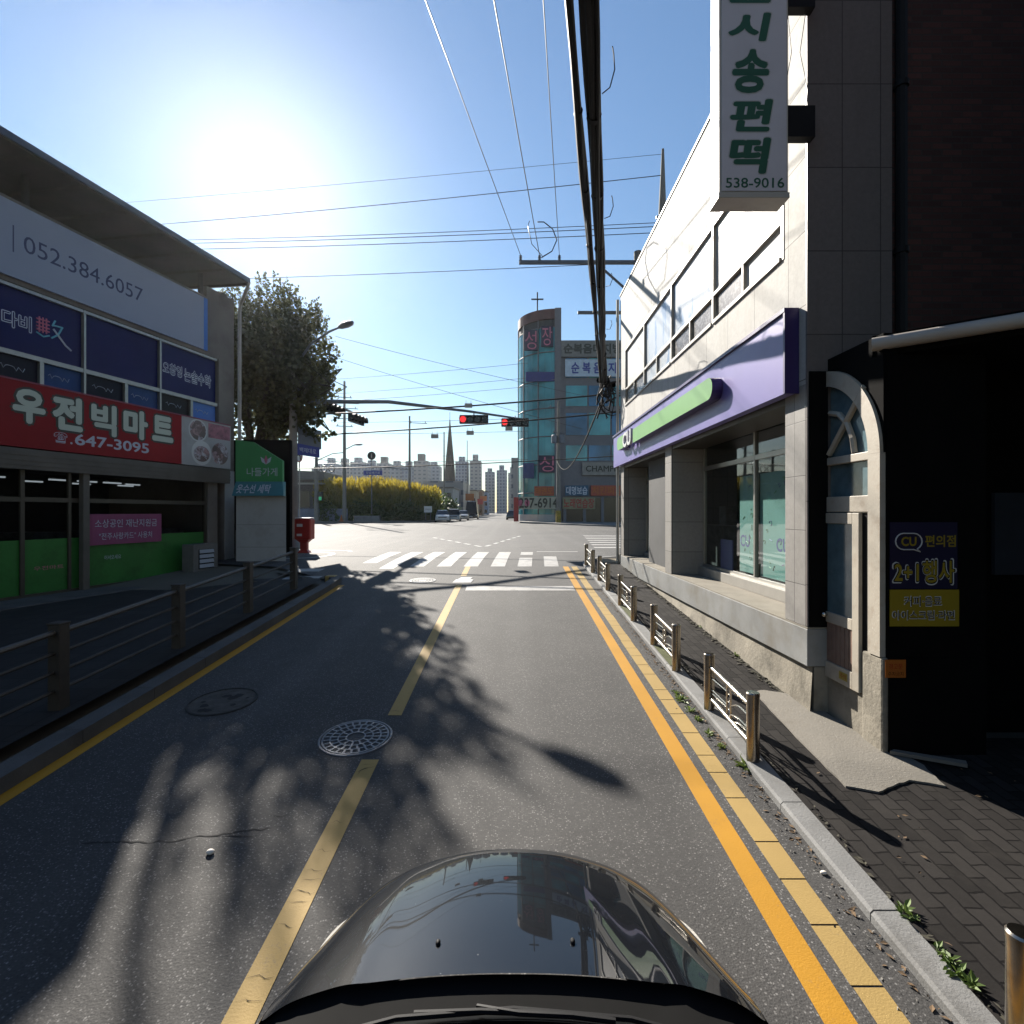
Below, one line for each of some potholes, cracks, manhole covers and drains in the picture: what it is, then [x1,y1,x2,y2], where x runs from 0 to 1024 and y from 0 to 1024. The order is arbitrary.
crack [81,814,287,844]
manhole cover [185,687,258,716]
manhole cover [317,720,393,757]
